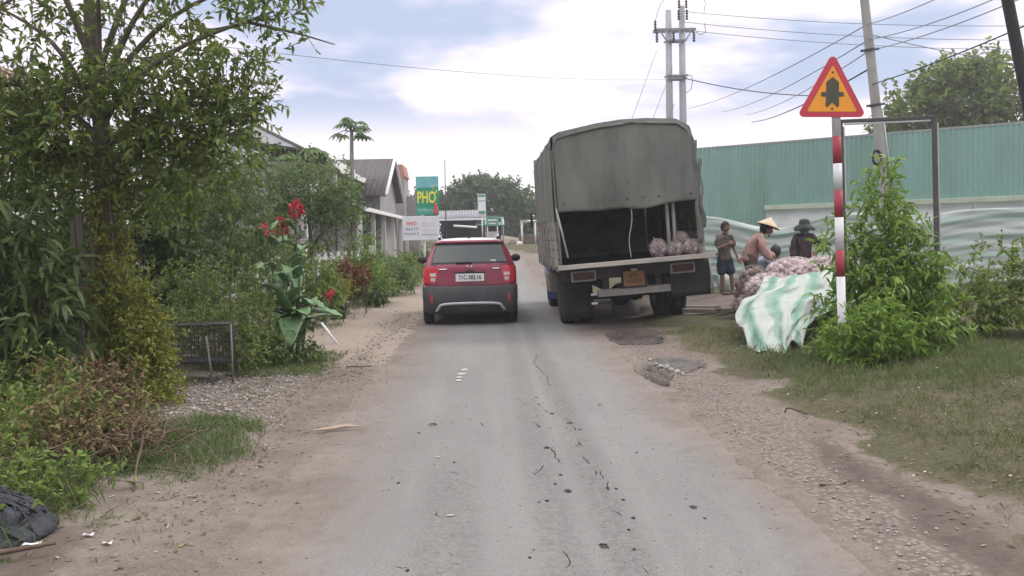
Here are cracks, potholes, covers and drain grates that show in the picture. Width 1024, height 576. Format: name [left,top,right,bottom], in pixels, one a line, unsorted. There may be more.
pothole [634,365,674,387]
